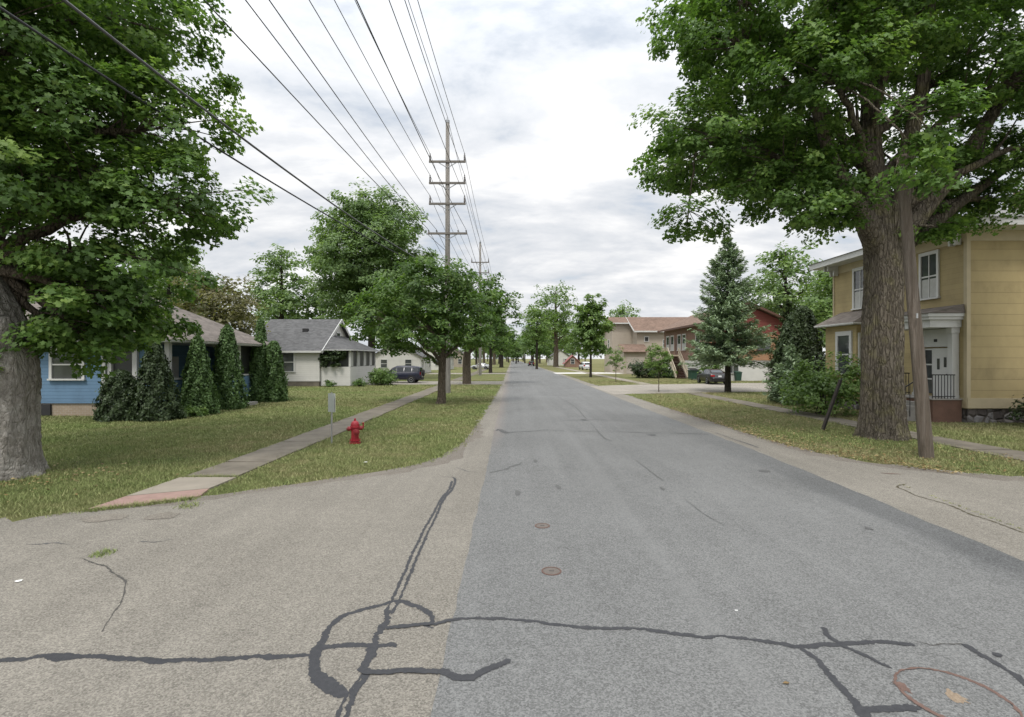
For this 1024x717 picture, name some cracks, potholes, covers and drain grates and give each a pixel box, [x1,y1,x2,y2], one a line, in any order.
manhole cover [891,667,1023,717]
crack [887,473,1024,533]
utility cover [541,567,562,576]
crack [83,558,127,632]
